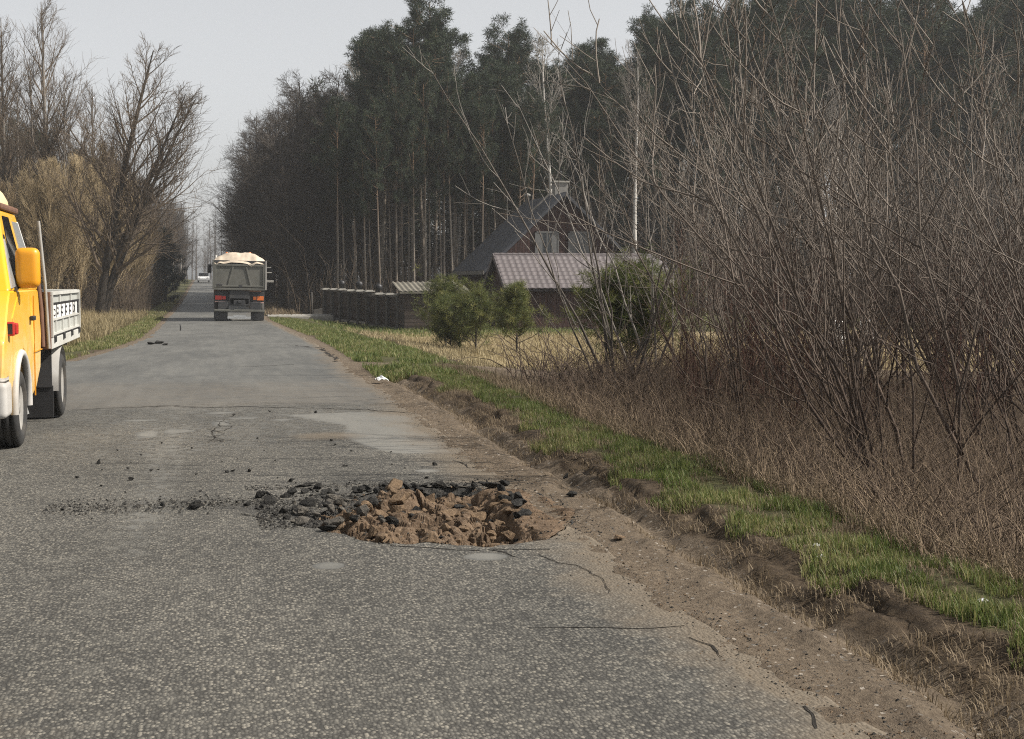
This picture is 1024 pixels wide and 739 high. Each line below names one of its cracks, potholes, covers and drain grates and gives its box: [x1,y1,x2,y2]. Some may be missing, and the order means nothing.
crack [404,546,610,592]
crack [541,625,722,657]
pothole [303,487,575,547]
crack [82,405,405,442]
crack [804,705,817,729]
